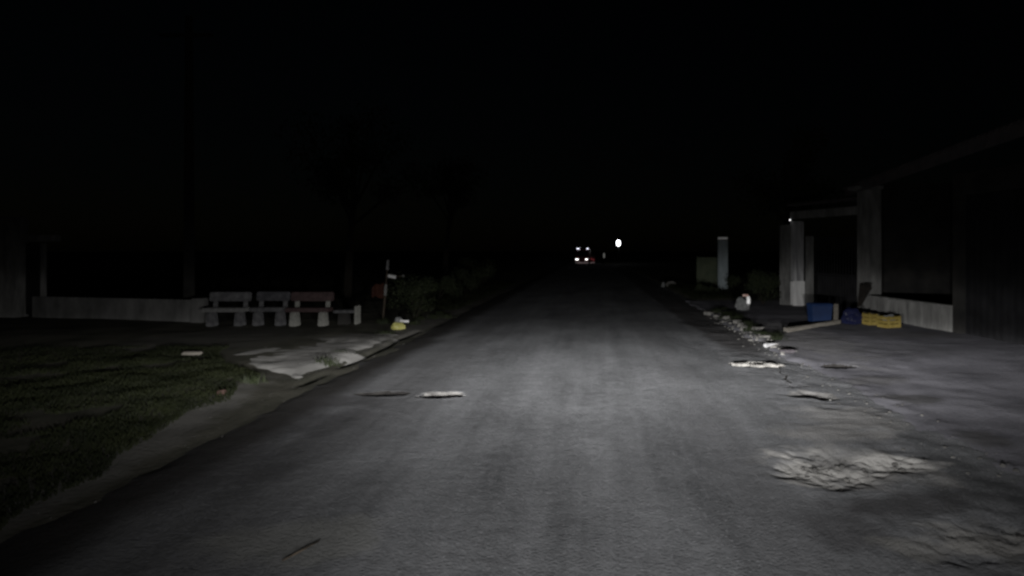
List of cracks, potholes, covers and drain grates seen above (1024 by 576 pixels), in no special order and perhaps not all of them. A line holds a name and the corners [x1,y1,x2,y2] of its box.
crack [774,370,810,388]
pothole [407,390,474,400]
pothole [778,388,849,403]
pothole [813,362,864,370]
pothole [343,389,425,398]
pothole [745,443,955,498]
pothole [723,361,793,369]
